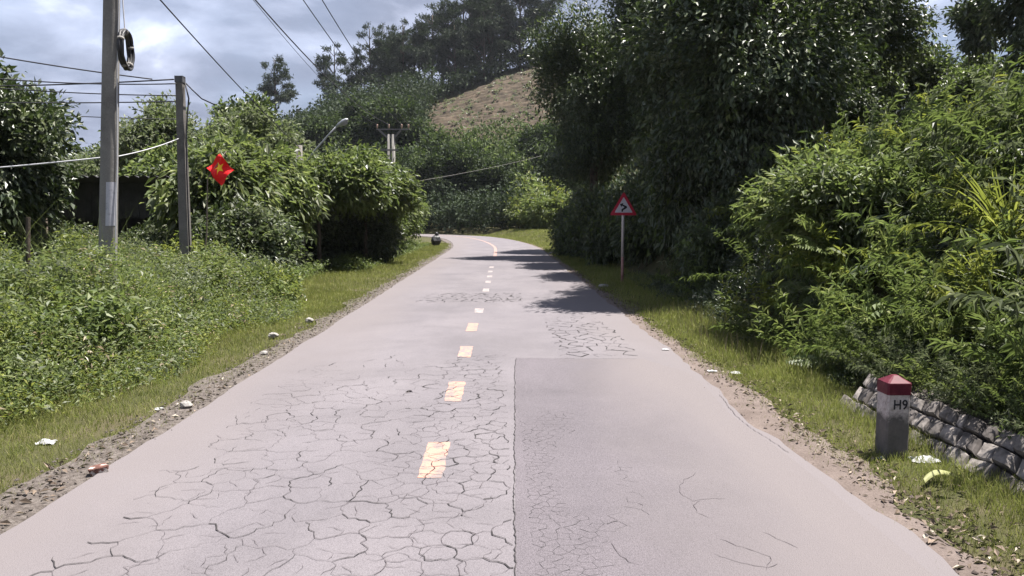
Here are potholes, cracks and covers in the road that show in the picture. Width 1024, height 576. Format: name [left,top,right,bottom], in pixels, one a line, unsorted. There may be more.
crack [424,293,522,302]
crack [720,532,796,570]
crack [521,391,645,576]
crack [546,316,634,357]
crack [30,353,514,576]
